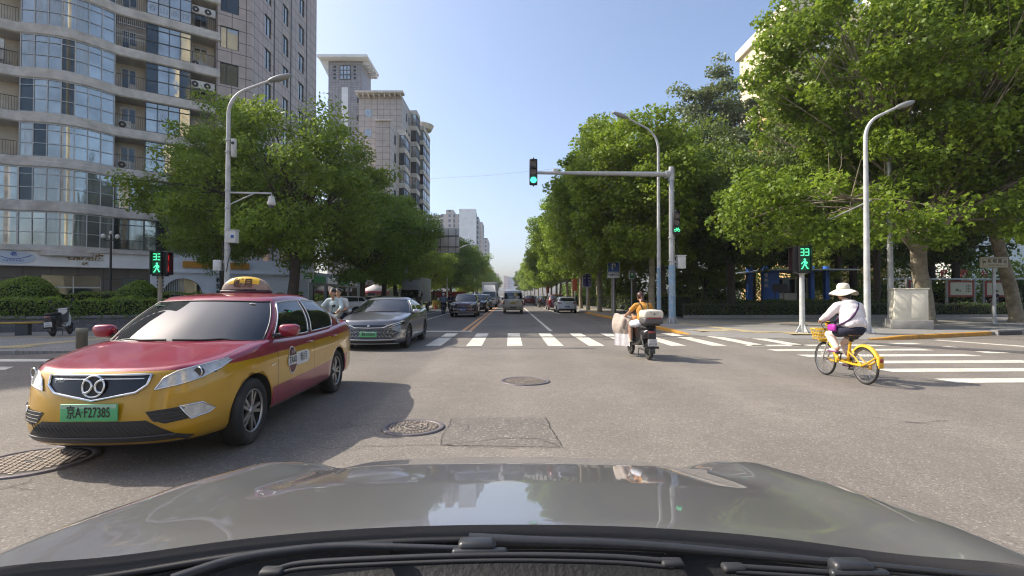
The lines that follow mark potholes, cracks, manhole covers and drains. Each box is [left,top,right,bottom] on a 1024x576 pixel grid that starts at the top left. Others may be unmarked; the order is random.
manhole cover [0,446,101,480]
manhole cover [381,419,445,437]
manhole cover [501,377,550,386]
